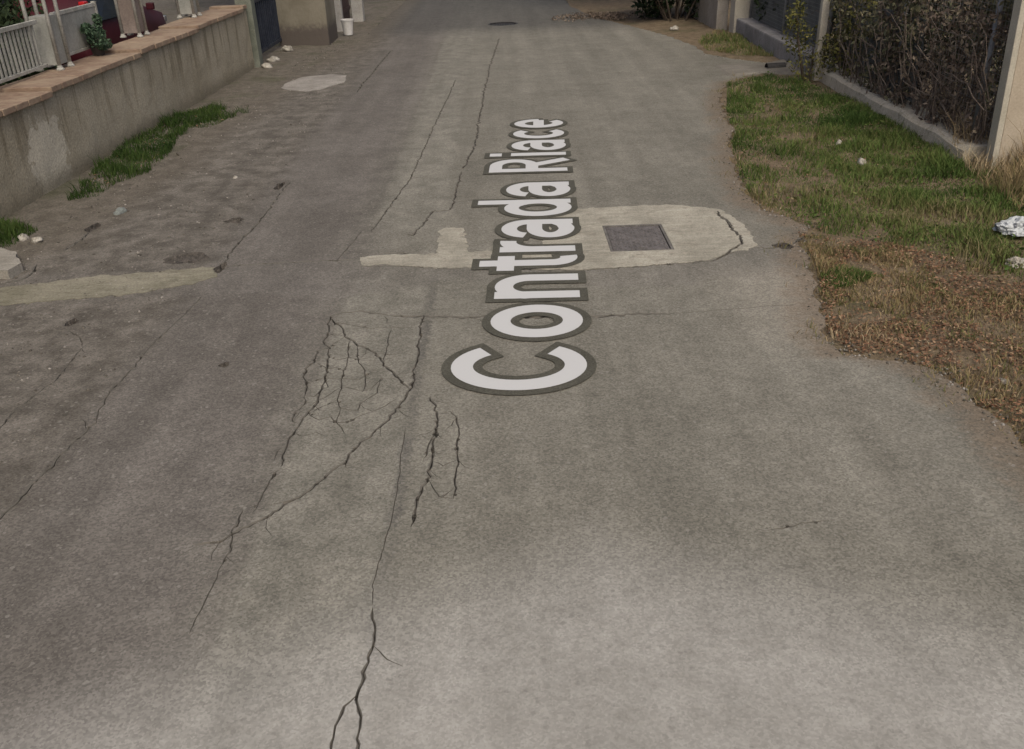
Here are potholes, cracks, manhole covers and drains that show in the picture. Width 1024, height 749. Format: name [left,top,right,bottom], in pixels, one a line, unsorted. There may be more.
crack [522,211,804,272]
manhole cover [602,224,674,252]
crack [763,520,832,531]
crack [0,39,500,565]
